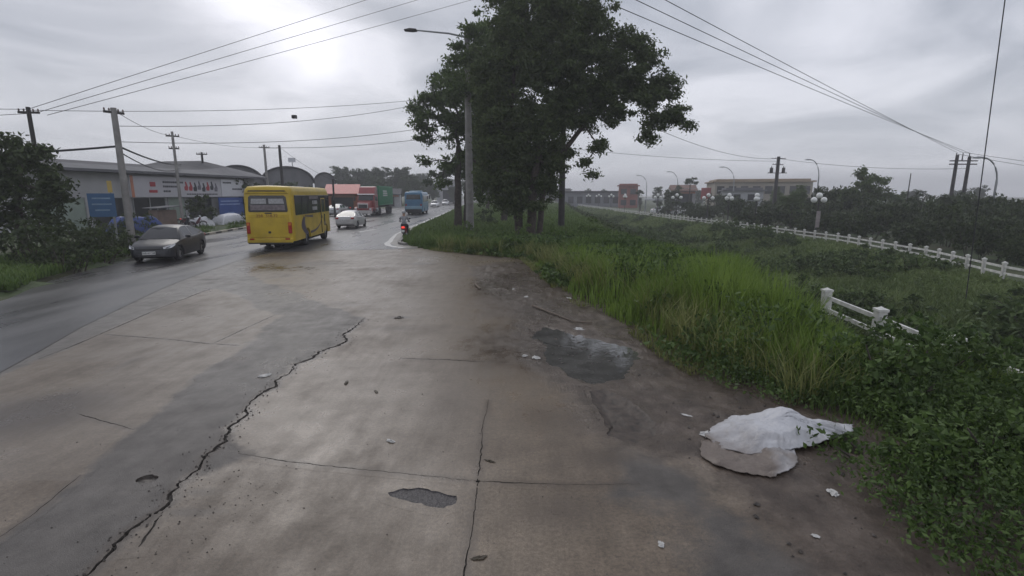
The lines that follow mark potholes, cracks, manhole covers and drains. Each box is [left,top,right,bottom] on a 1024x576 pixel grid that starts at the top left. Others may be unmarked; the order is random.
crack [86,319,613,576]
pothole [527,325,644,386]
pothole [388,488,457,508]
pothole [135,474,159,484]
